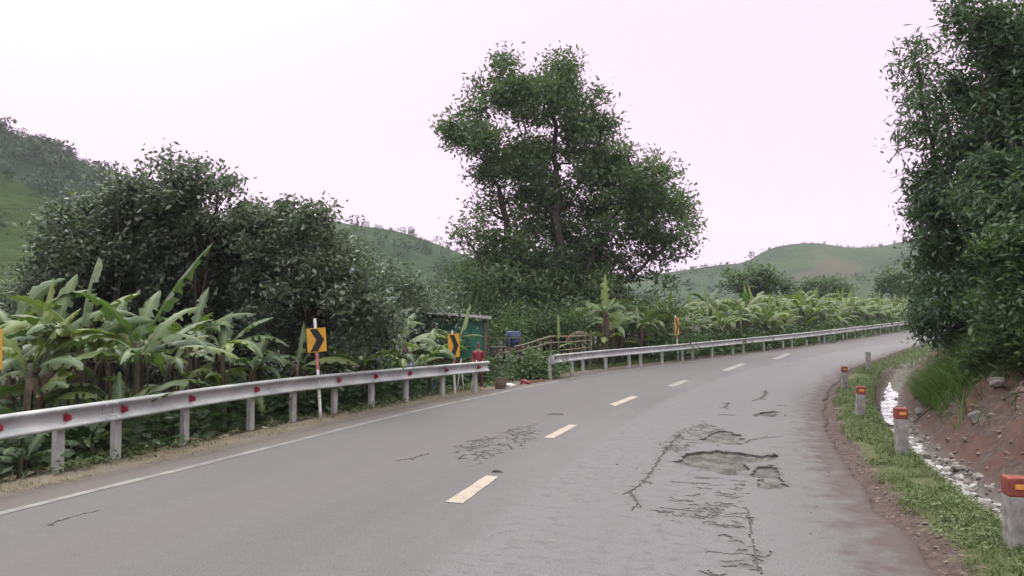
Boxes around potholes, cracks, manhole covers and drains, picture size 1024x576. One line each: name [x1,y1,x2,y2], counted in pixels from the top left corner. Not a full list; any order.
pothole [700,431,745,445]
pothole [670,450,779,476]
crack [623,403,772,576]
pothole [750,465,790,490]
crack [450,425,535,466]
